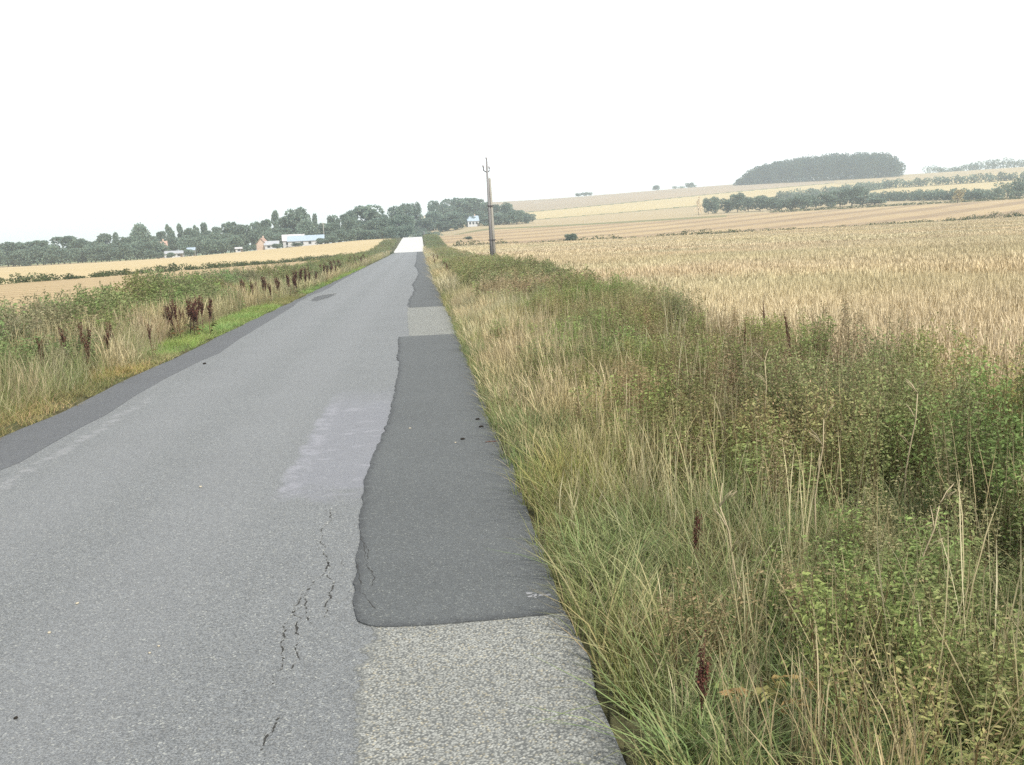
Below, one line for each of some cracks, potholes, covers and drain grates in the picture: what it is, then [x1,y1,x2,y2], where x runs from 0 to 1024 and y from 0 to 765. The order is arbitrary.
crack [272,509,376,684]
